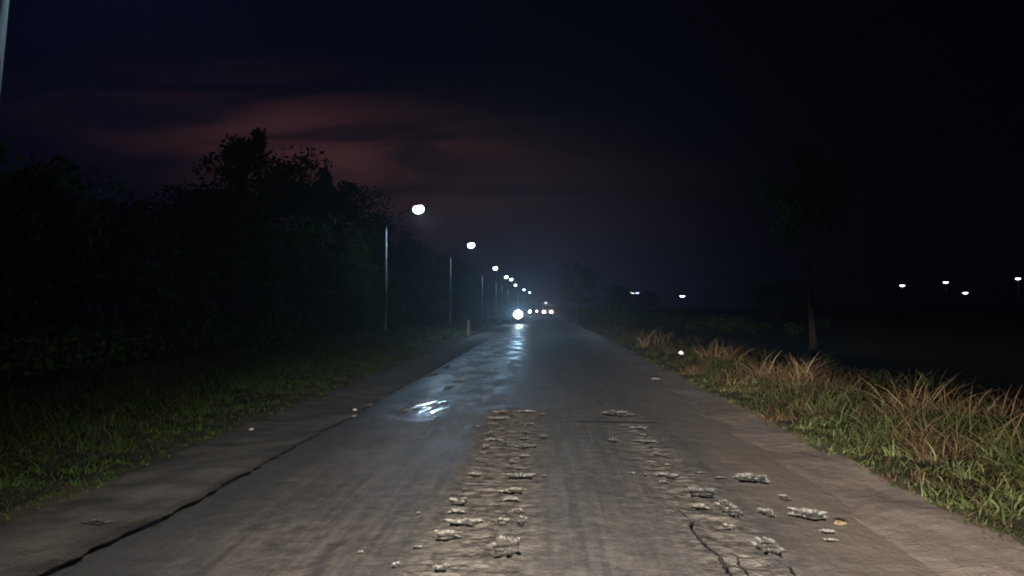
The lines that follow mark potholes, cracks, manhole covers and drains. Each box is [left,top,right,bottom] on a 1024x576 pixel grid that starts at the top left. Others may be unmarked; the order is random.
crack [775,559,797,576]
pothole [449,497,468,506]
pothole [654,471,680,479]
pothole [750,536,786,558]
pothole [714,499,745,518]
pothole [489,535,522,559]
crack [676,507,749,576]
pothole [440,518,486,527]
pothole [757,508,778,518]
pothole [731,473,772,484]
pothole [432,563,451,573]
pothole [433,529,465,542]
